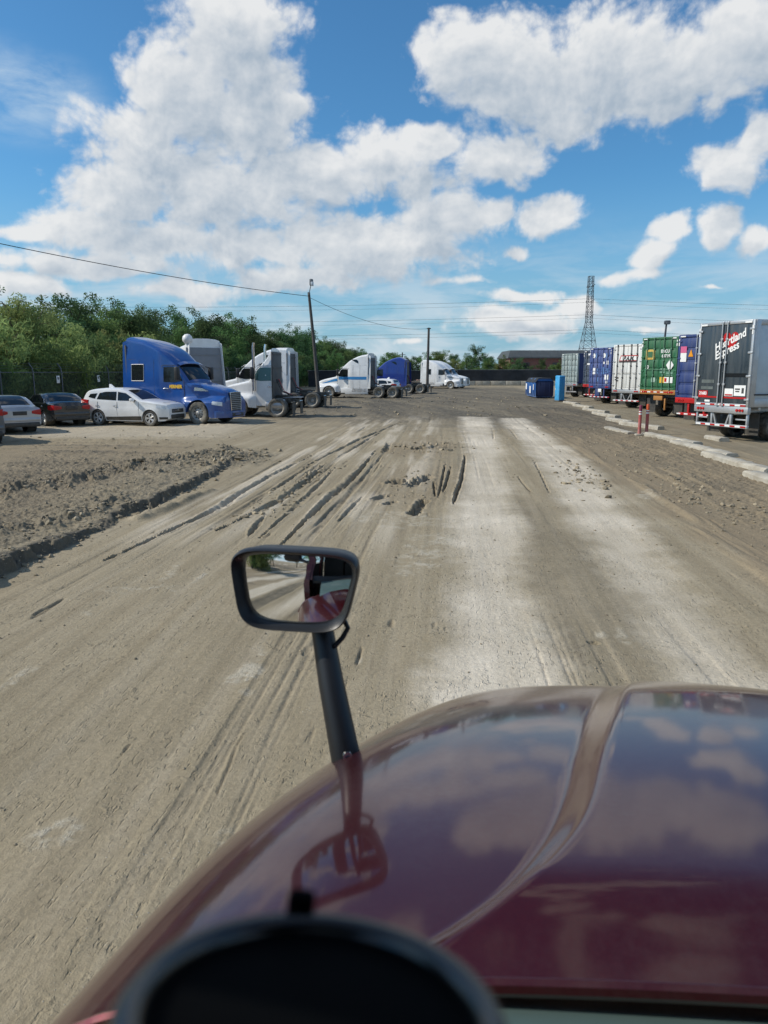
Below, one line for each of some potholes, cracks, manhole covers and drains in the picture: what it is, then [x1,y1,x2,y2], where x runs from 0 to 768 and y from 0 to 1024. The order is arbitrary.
pothole [405,498,432,517]
